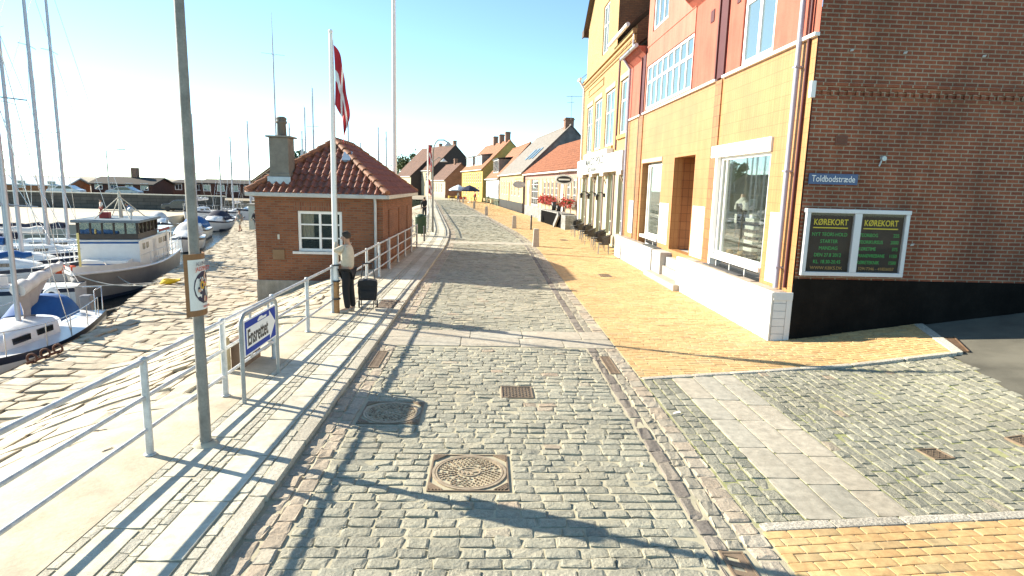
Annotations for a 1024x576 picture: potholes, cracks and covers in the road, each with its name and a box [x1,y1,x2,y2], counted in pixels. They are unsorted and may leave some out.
manhole cover [426,454,509,492]
manhole cover [356,401,425,425]
drain grate [599,356,621,374]
drain grate [718,550,759,576]
drain grate [368,351,388,368]
